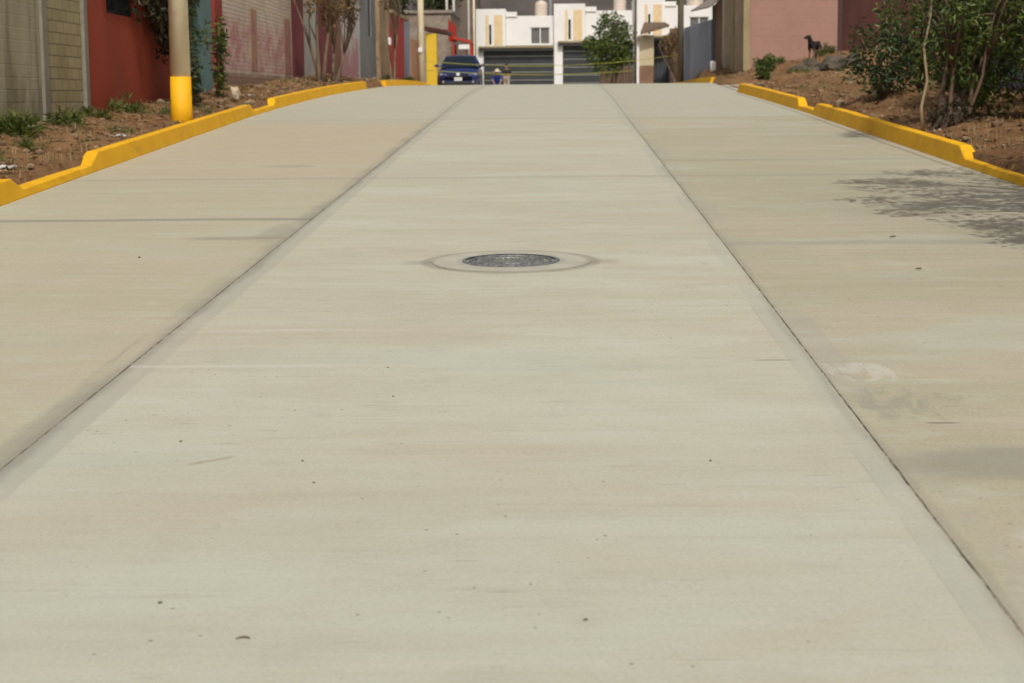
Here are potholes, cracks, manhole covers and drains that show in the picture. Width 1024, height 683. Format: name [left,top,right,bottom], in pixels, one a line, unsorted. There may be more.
manhole cover [431,250,591,273]
